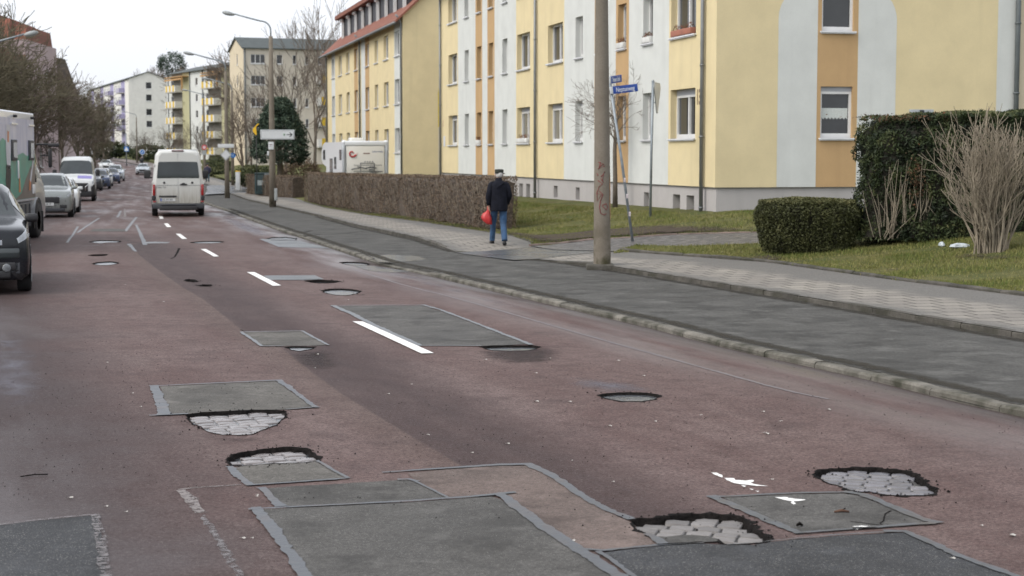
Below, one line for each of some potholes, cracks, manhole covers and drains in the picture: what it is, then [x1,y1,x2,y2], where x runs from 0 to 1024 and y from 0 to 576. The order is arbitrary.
pothole [205,445,356,468]
pothole [582,510,793,547]
crack [851,510,891,529]
pothole [170,407,314,440]
pothole [805,463,957,503]
